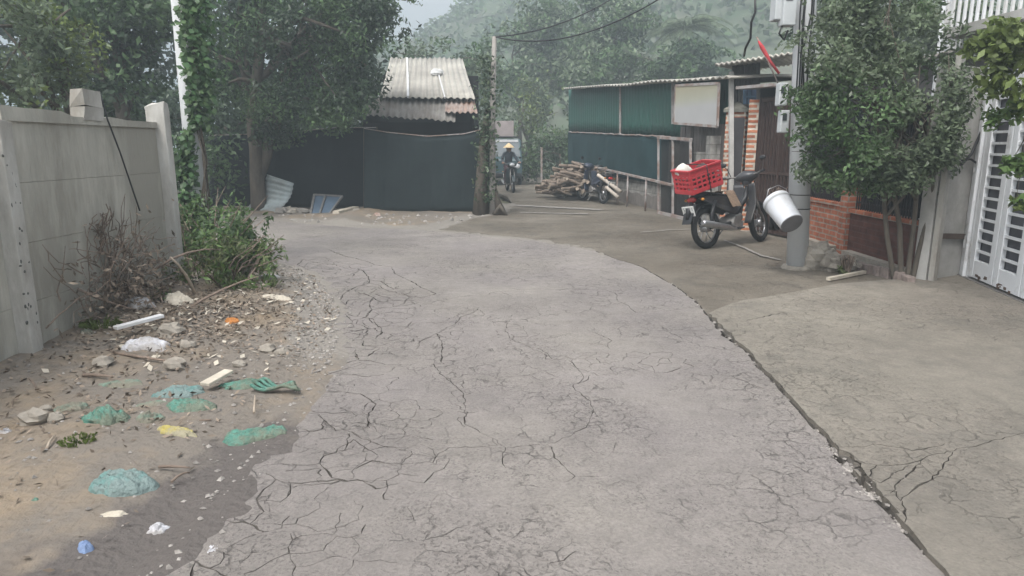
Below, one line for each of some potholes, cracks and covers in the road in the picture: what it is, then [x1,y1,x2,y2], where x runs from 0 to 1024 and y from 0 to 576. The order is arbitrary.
crack [497,320,692,479]
crack [855,433,1023,522]
crack [190,244,506,576]
